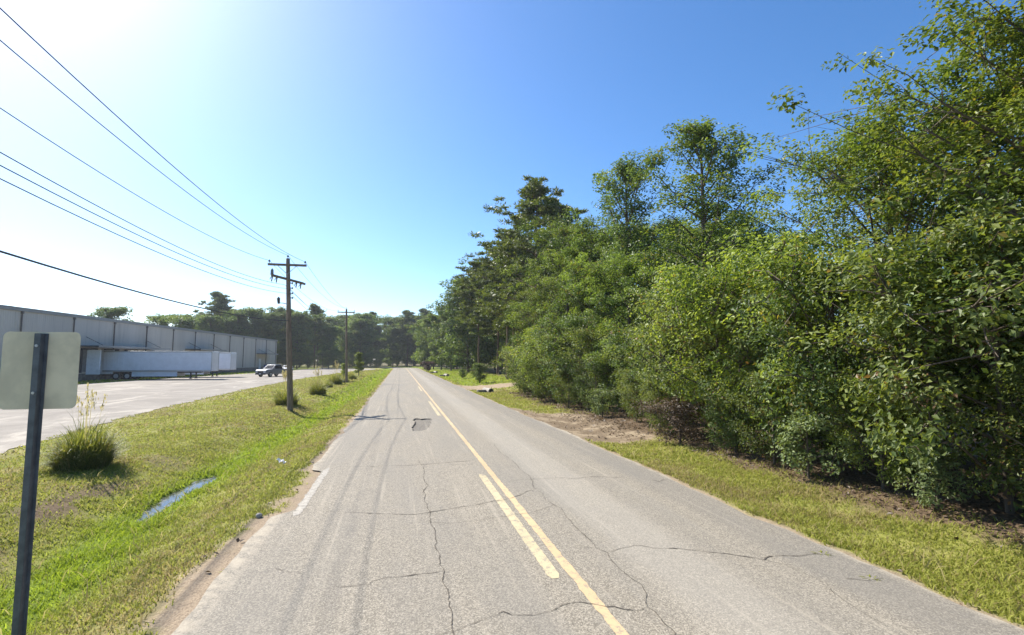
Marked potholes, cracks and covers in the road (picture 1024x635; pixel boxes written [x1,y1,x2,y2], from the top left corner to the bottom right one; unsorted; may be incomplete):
crack [340,445,882,635]
pothole [411,418,432,431]
